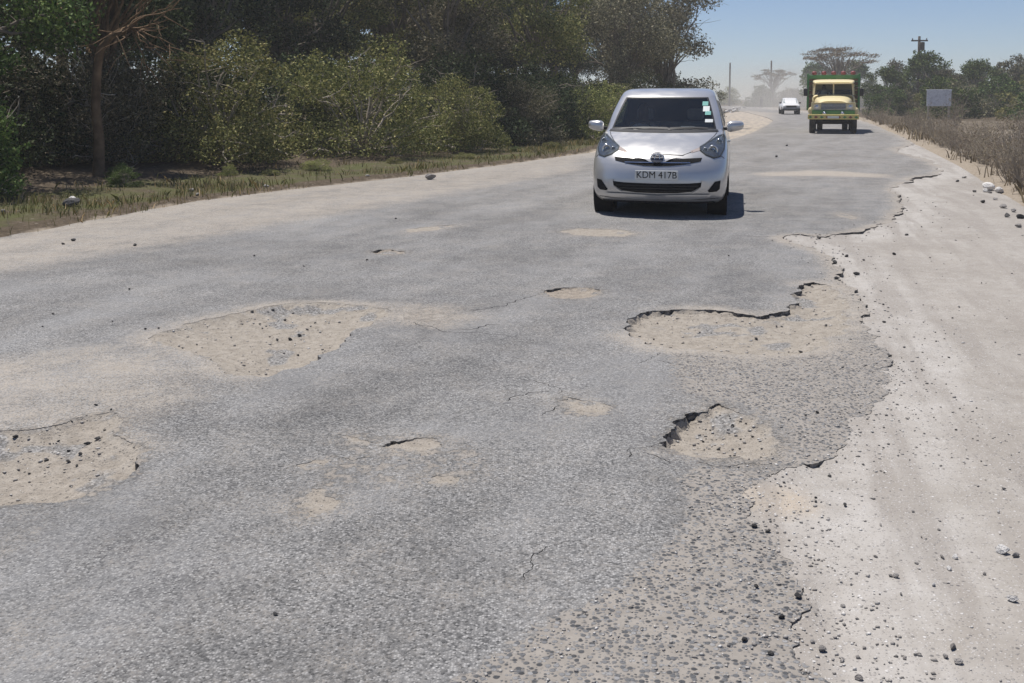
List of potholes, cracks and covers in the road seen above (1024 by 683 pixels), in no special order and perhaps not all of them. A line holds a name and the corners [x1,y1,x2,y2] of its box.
crack [523,539,584,582]
crack [415,294,540,338]
pothole [544,287,600,299]
pothole [0,412,146,506]
pothole [560,397,612,415]
pothole [383,438,442,456]
pothole [660,403,783,461]
pothole [623,282,852,356]
pothole [148,302,391,377]
